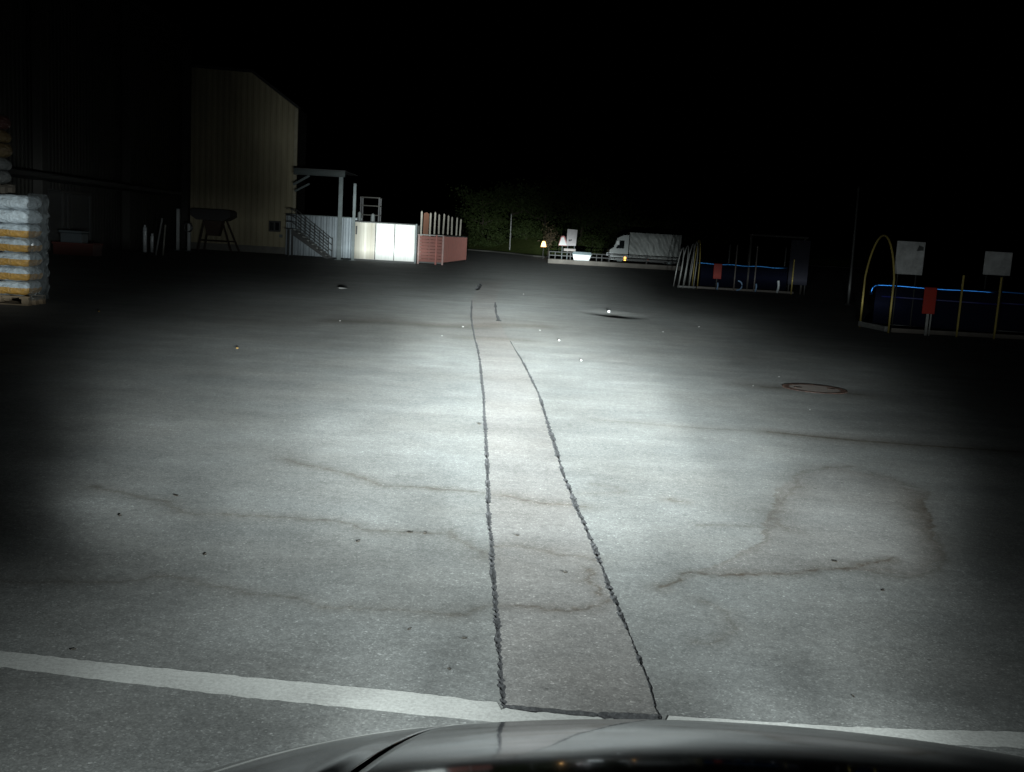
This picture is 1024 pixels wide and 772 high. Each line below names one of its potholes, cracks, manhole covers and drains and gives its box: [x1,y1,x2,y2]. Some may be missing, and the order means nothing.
manhole cover [782,383,848,394]
